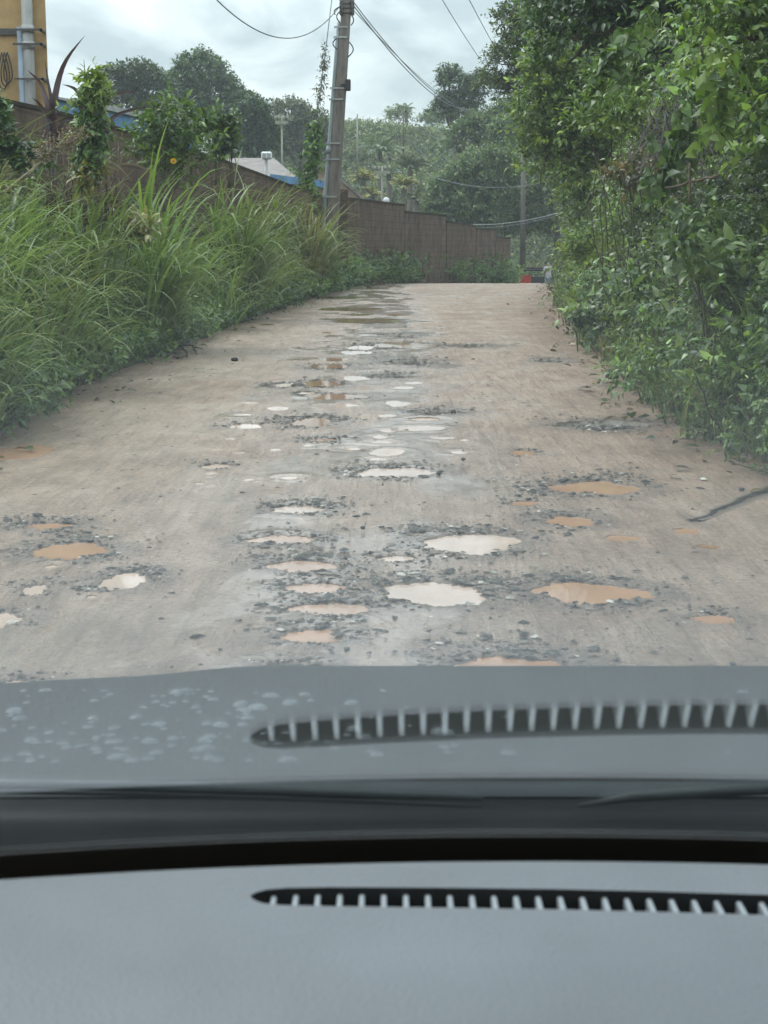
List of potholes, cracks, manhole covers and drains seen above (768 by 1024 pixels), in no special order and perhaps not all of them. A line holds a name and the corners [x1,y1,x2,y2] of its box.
pothole [290,363,370,371]
pothole [474,462,707,502]
pothole [498,506,629,533]
pothole [383,423,466,433]
pothole [252,410,380,432]
pothole [250,381,308,390]
pothole [383,405,477,416]
pothole [202,420,278,432]
pothole [241,570,386,598]
pothole [283,376,364,389]
pothole [0,574,87,602]
pothole [348,446,425,458]
